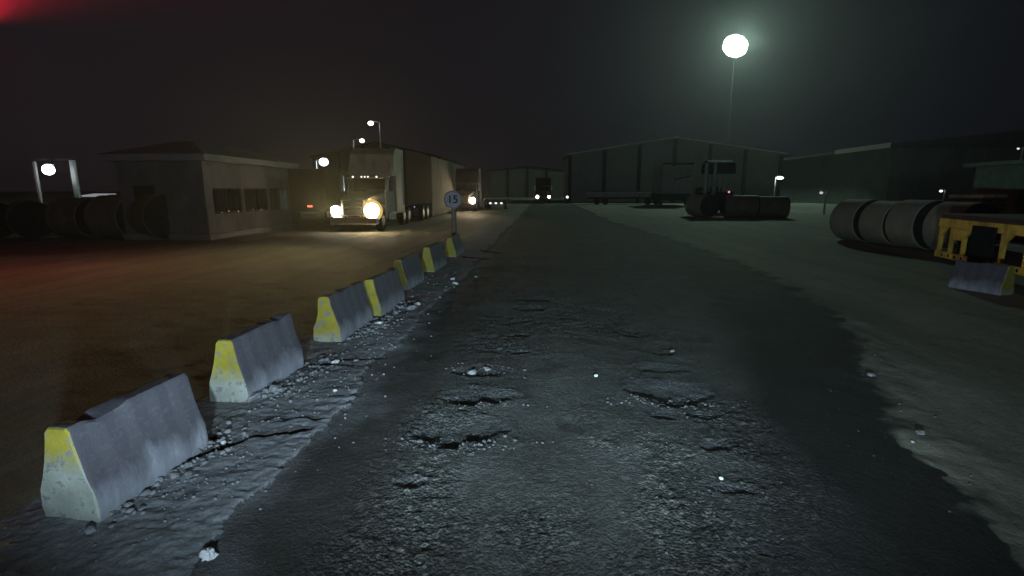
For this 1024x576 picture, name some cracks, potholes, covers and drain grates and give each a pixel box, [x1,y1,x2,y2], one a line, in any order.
crack [189,415,324,462]
pothole [446,363,516,377]
pothole [410,412,514,453]
pothole [620,376,723,410]
pothole [695,437,744,452]
pothole [645,410,681,420]
pothole [704,481,766,495]
pothole [394,473,431,491]
pothole [436,384,528,406]
